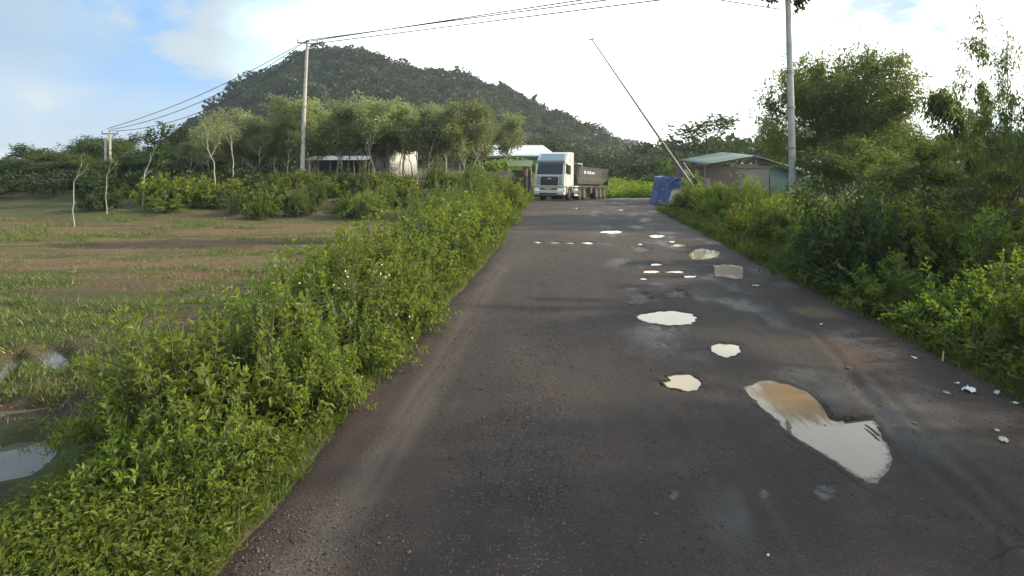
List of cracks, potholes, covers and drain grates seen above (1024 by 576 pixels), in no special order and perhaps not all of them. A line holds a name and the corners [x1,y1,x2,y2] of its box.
pothole [653,372,707,392]
pothole [707,341,745,359]
pothole [631,309,703,326]
pothole [710,263,746,280]
pothole [735,374,912,500]
pothole [686,247,724,261]
